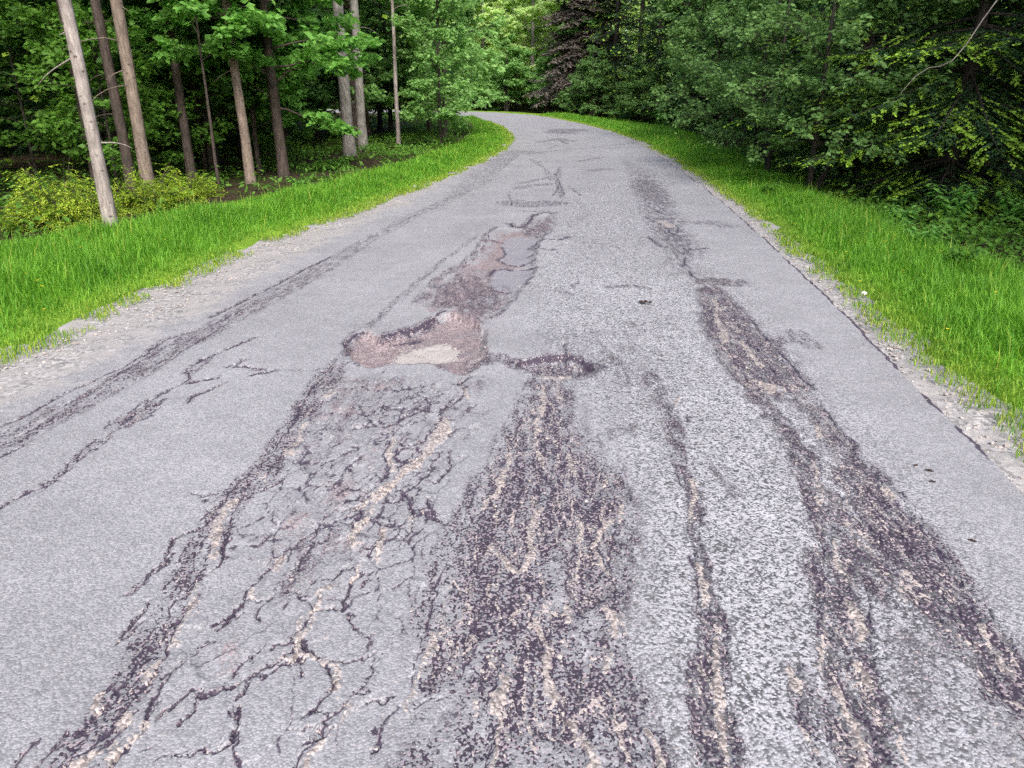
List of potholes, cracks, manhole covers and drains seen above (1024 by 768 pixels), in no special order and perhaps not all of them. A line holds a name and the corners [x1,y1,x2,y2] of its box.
pothole [413,211,561,323]
pothole [342,311,494,376]
pothole [515,353,602,380]
crack [509,168,565,212]
crack [1,336,258,509]
crack [143,360,485,768]
